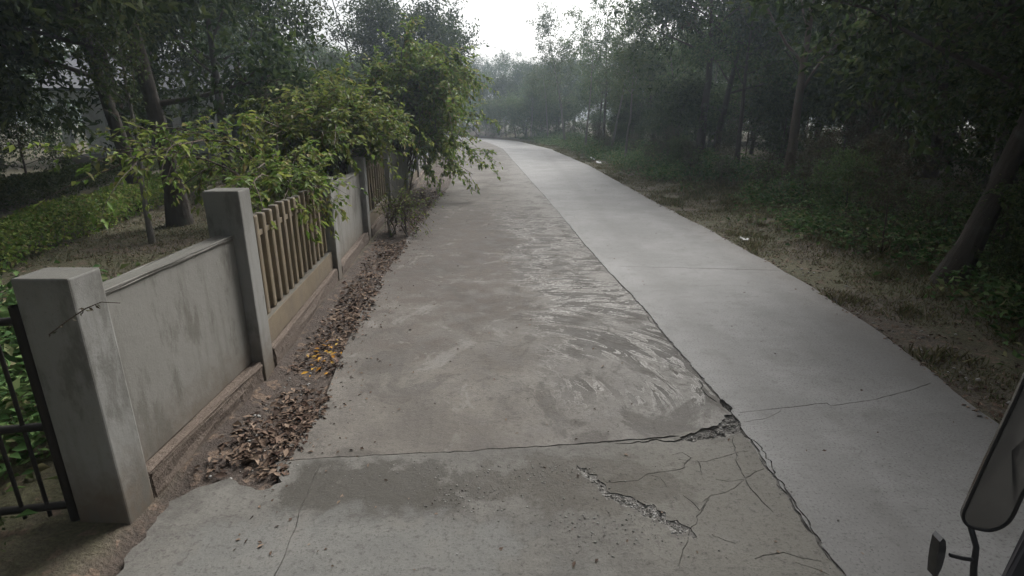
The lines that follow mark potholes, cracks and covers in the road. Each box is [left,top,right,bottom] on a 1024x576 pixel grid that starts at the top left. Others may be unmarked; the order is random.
crack [507,154,846,576]
pothole [681,415,741,442]
crack [747,384,927,422]
